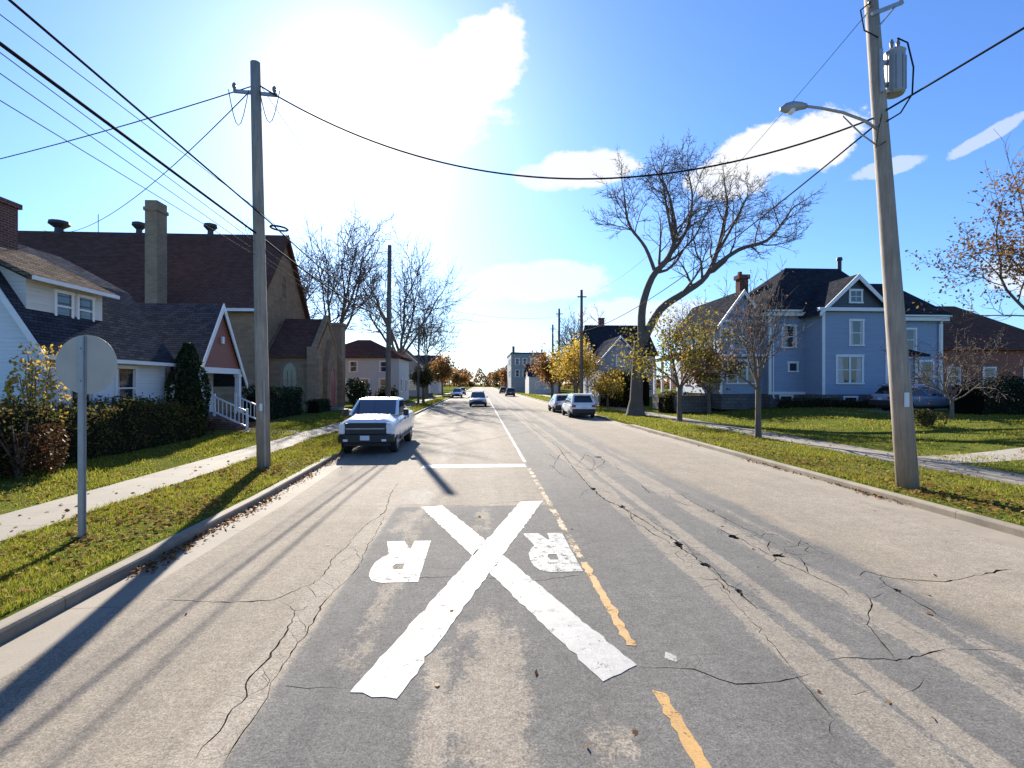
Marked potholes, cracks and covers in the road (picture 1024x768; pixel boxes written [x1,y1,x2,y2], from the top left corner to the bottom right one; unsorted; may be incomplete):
crack [641,485,1017,661]
crack [530,426,837,741]
